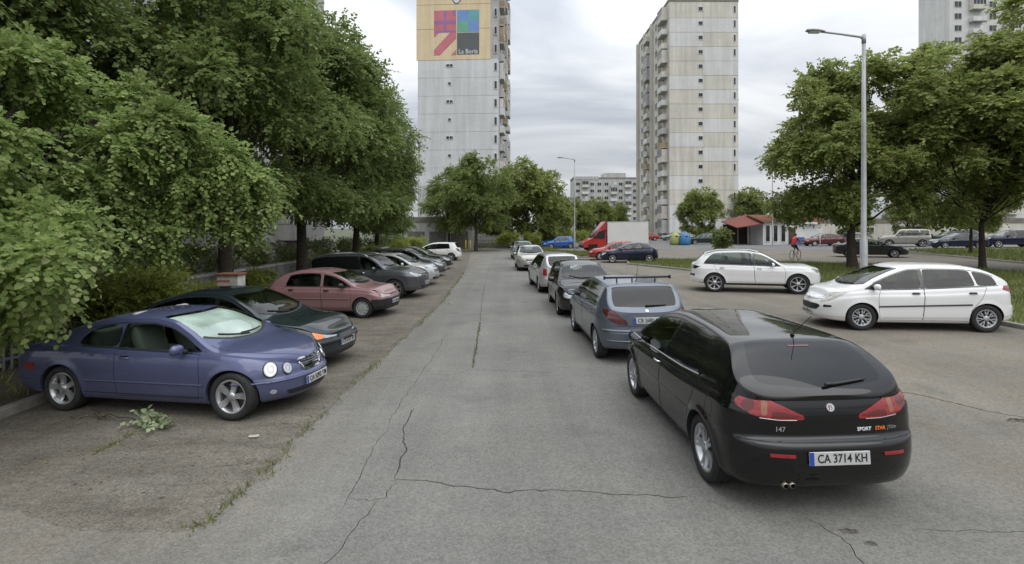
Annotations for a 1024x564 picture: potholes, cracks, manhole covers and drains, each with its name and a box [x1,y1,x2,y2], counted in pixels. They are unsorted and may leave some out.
crack [325,271,685,564]
crack [902,392,1024,419]
